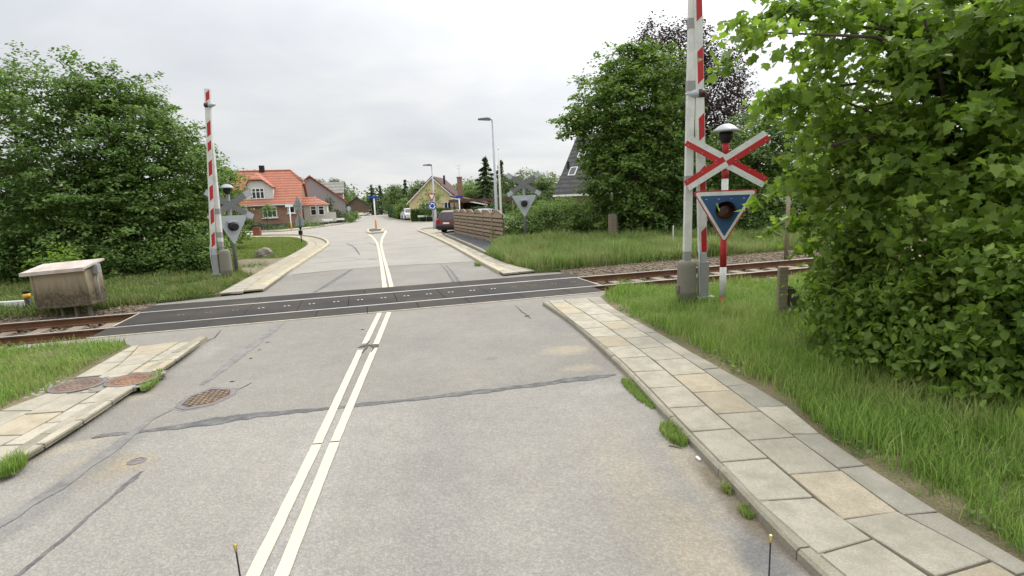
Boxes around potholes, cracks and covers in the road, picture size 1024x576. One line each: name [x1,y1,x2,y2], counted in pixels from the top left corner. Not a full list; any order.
utility cover [127,457,147,465]
manhole cover [103,372,159,388]
manhole cover [47,377,106,394]
